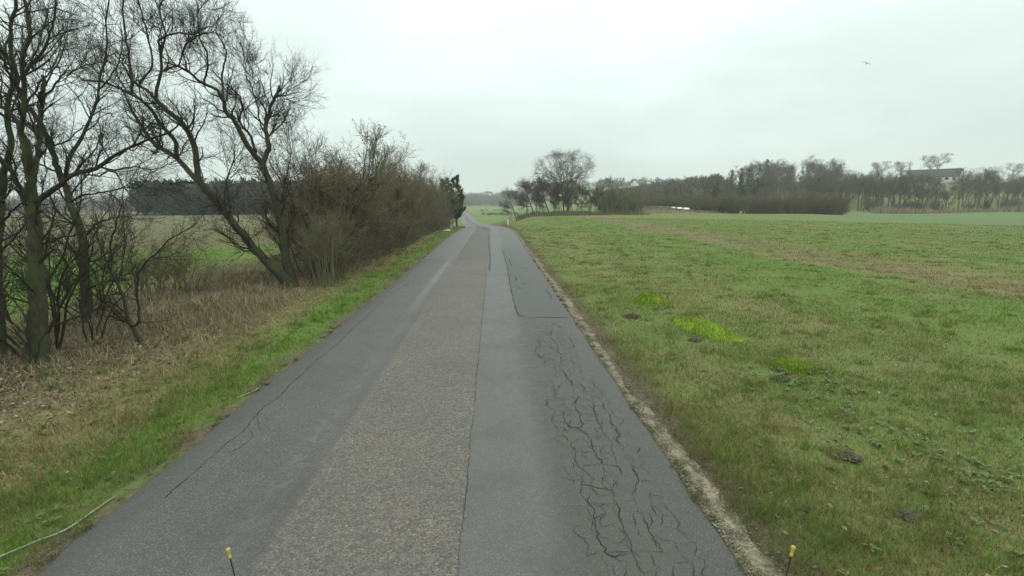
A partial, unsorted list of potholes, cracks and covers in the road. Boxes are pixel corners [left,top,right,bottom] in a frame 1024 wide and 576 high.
crack [535,324,706,576]
crack [164,287,402,499]
